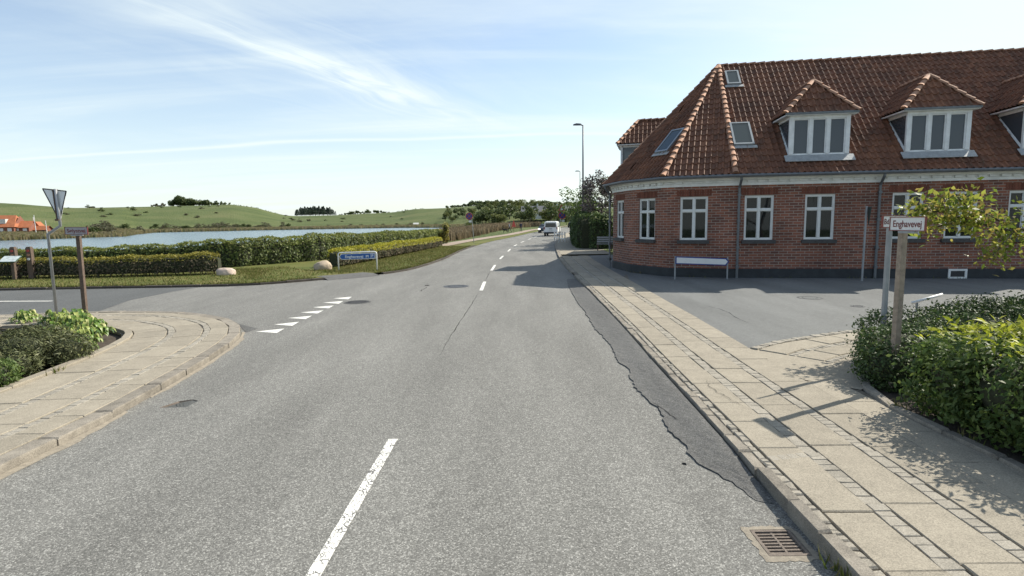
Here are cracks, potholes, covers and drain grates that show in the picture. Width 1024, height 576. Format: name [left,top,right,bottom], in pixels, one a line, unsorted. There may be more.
drain grate [740,525,819,562]
